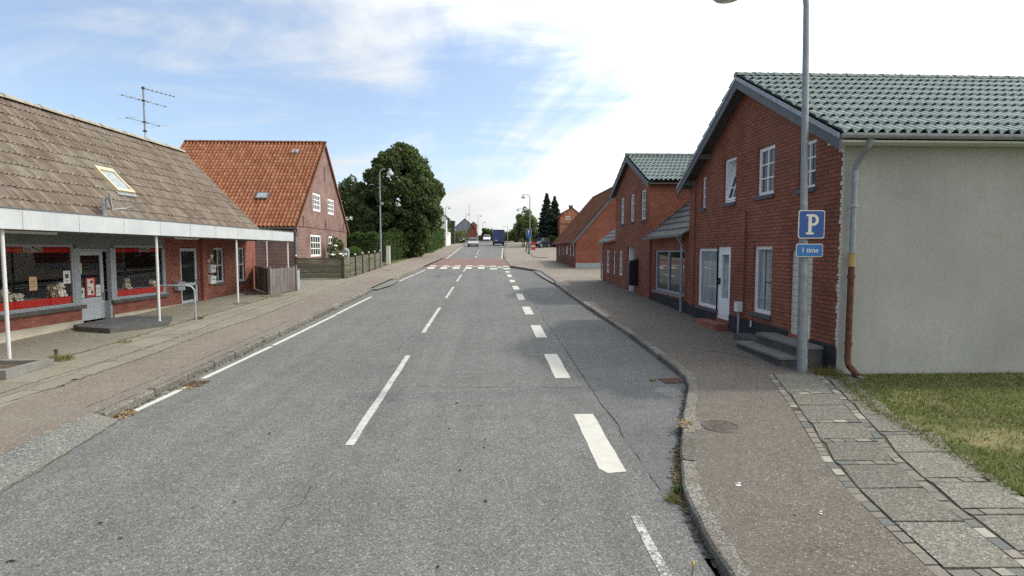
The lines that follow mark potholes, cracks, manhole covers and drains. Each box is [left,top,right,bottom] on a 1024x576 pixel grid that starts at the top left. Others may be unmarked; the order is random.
manhole cover [700,420,741,433]
crack [564,348,669,505]
